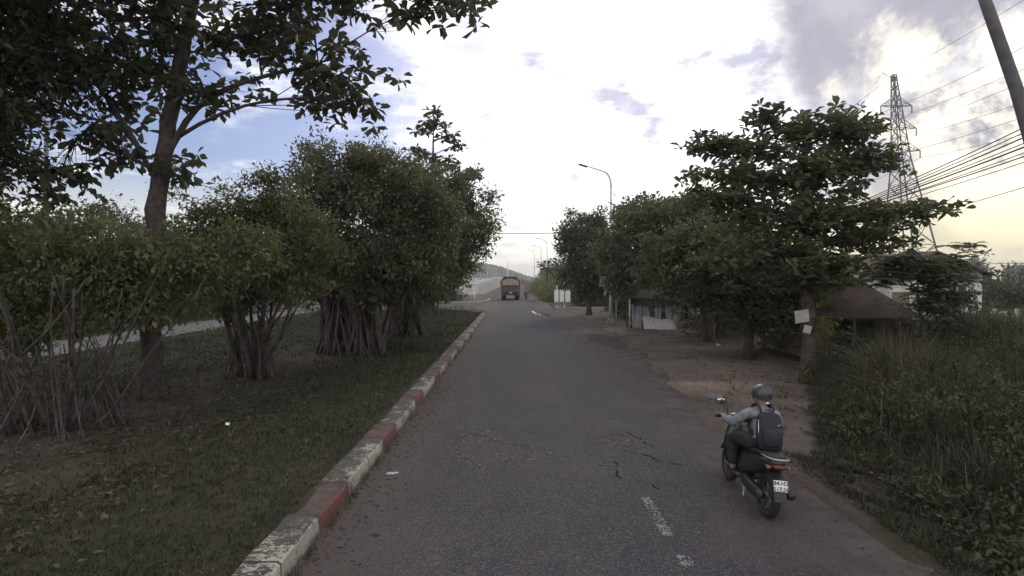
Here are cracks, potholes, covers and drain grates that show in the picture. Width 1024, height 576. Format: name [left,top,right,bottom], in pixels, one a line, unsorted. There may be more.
crack [599,432,682,480]
